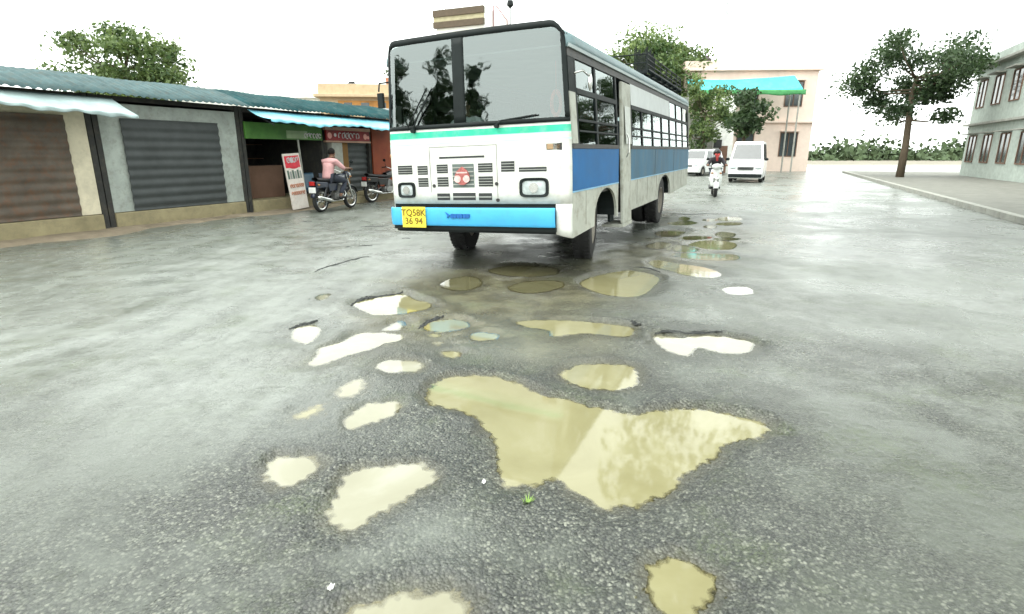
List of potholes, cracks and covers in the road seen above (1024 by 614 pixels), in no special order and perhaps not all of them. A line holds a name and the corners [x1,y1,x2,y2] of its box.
pothole [488,276,576,302]
pothole [310,392,424,444]
pothole [412,313,494,336]
crack [315,245,372,272]
pothole [413,367,820,534]
pothole [639,256,744,279]
pothole [703,282,778,298]
pothole [253,558,567,614]
pothole [343,352,449,383]
pothole [275,327,417,374]
pothole [262,319,338,350]
